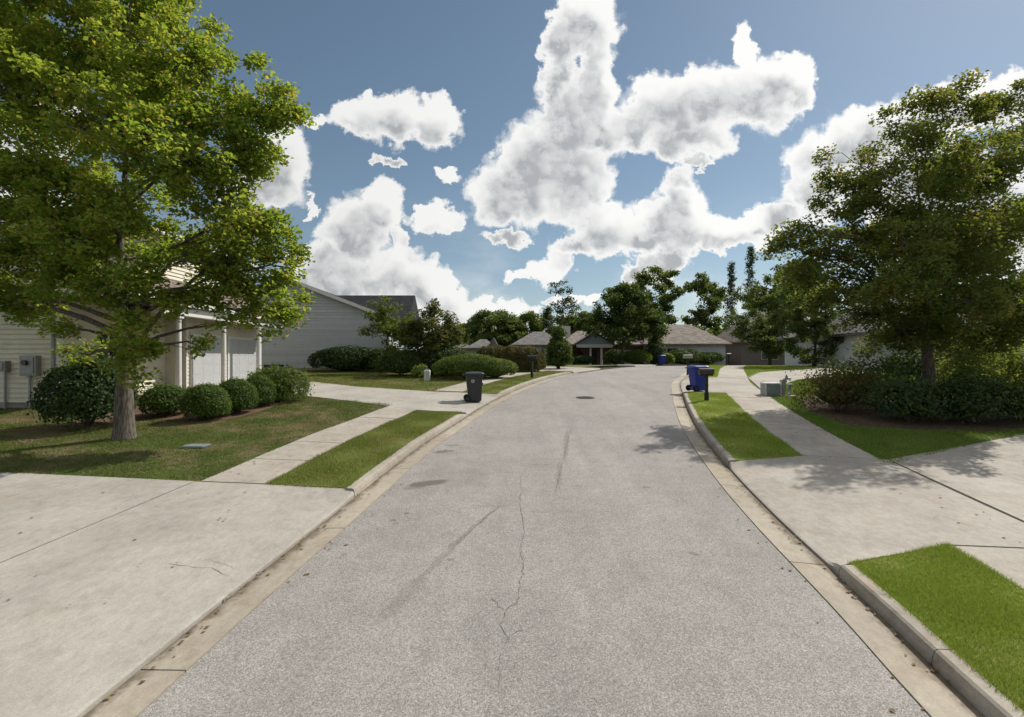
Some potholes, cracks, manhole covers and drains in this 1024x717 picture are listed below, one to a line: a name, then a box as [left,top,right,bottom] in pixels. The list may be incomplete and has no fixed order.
crack [449,429,571,691]
